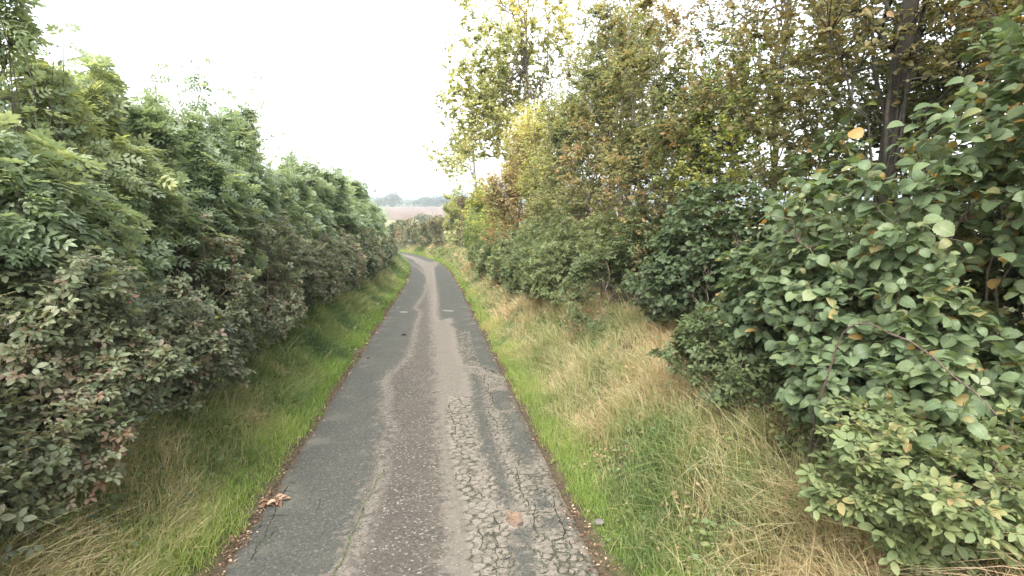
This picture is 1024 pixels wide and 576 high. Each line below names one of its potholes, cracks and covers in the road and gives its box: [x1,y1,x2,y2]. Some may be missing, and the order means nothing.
crack [448,331,591,576]
crack [250,466,307,560]
